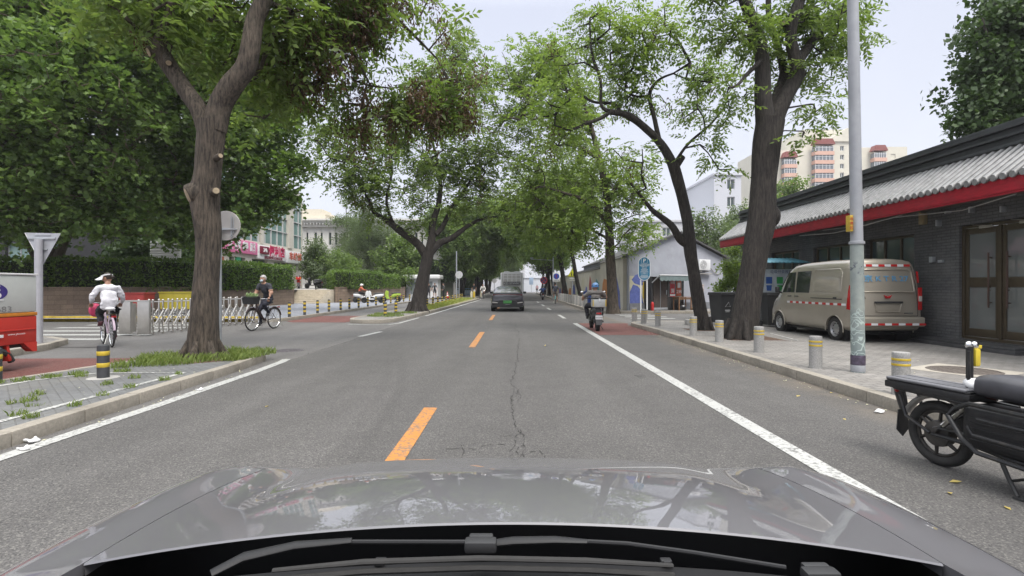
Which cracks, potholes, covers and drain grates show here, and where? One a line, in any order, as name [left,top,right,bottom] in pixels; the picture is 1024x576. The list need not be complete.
crack [446,350,545,458]
manhole cover [911,363,1024,377]
